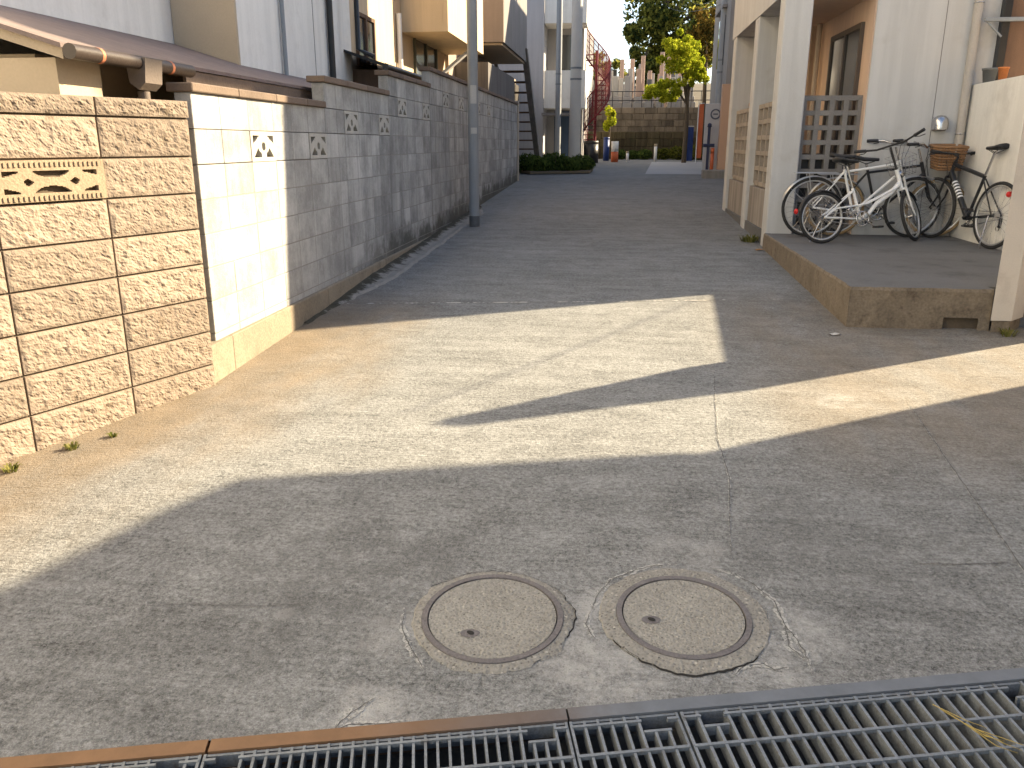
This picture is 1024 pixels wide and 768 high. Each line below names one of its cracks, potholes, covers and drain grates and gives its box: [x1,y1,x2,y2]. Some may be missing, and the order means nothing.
drain grate [679,681,1024,768]
crack [335,697,406,728]
crack [398,608,427,670]
drain grate [569,712,700,768]
crack [714,371,813,676]
manhole cover [411,570,577,674]
manhole cover [599,568,773,677]
drain grate [61,755,202,768]
drain grate [200,722,578,768]
